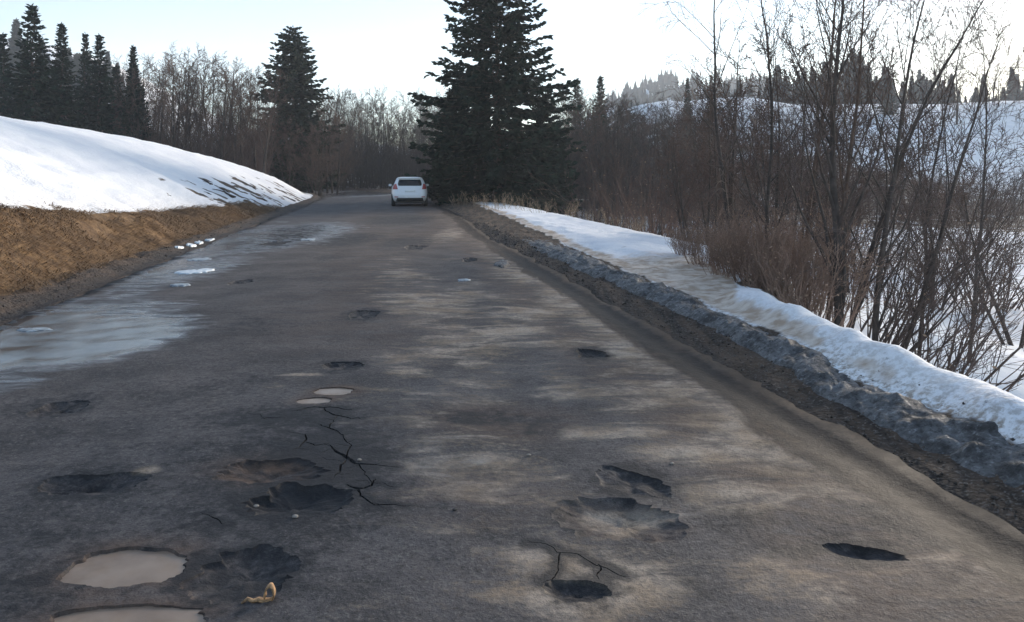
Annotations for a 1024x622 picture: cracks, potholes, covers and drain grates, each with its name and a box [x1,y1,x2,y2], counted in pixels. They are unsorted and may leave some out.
pothole [595,465,672,498]
pothole [541,579,612,603]
pothole [55,546,189,588]
pothole [313,387,355,395]
pothole [241,481,354,516]
pothole [321,361,364,370]
pothole [212,457,331,484]
pothole [26,400,90,418]
crack [260,407,401,508]
crack [535,542,624,582]
pothole [179,544,302,604]
